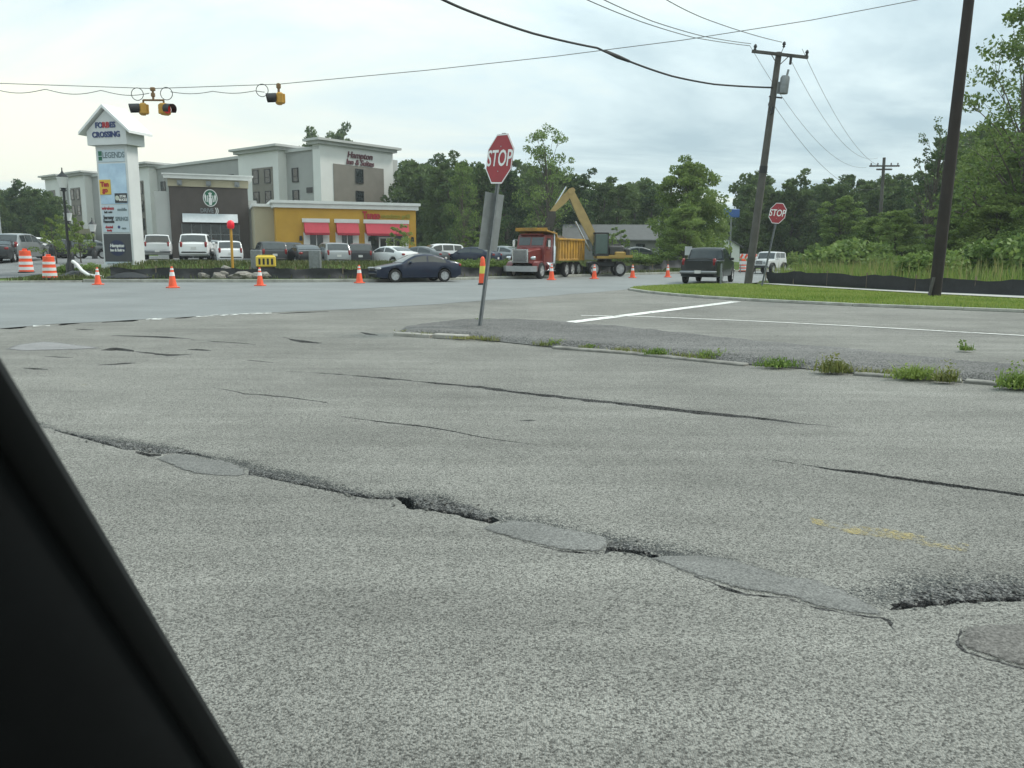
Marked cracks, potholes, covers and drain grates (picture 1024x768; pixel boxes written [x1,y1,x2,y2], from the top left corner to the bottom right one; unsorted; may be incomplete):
crack [694,575,894,630]
crack [213,387,534,445]
crack [764,458,1024,496]
crack [248,467,394,500]
crack [54,429,211,458]
crack [522,541,599,554]
crack [102,335,273,365]
